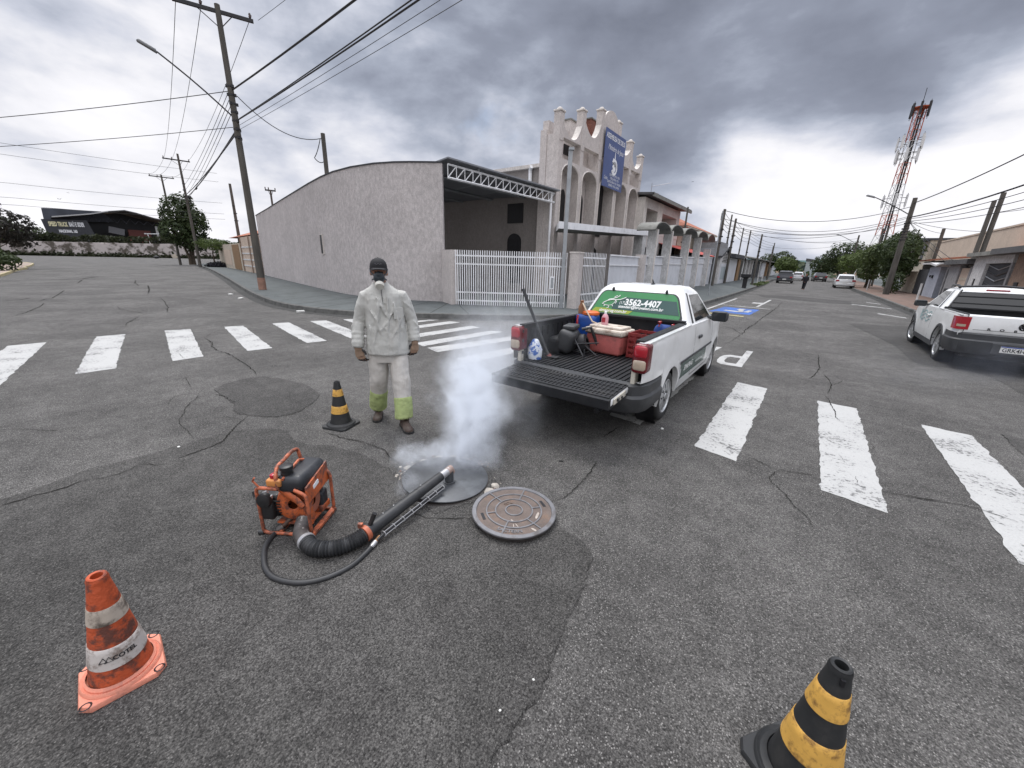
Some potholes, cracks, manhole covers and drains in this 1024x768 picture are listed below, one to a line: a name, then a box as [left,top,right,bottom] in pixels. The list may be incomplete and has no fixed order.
crack [2,379,246,506]
manhole cover [472,487,556,542]
crack [750,457,820,527]
crack [889,492,1017,522]
manhole cover [394,452,502,513]
crack [800,355,842,419]
